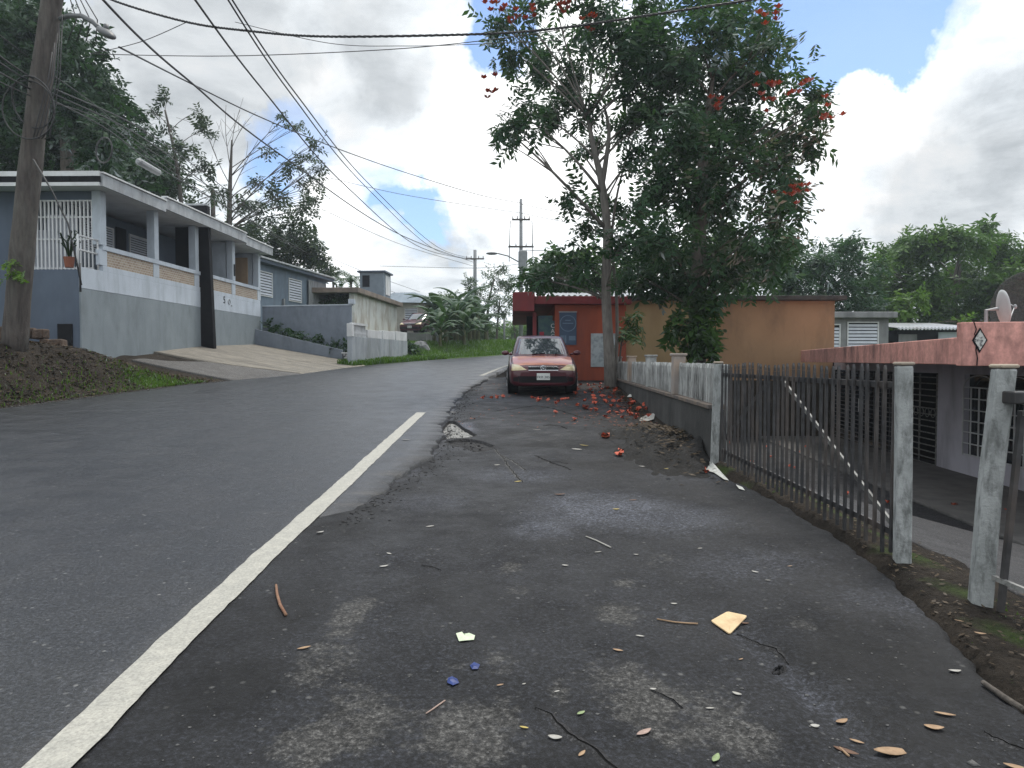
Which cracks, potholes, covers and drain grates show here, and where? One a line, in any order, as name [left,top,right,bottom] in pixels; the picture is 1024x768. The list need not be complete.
crack [494,449,571,483]
pothole [442,421,477,440]
crack [652,690,683,709]
crack [983,731,1024,752]
crack [736,634,789,665]
